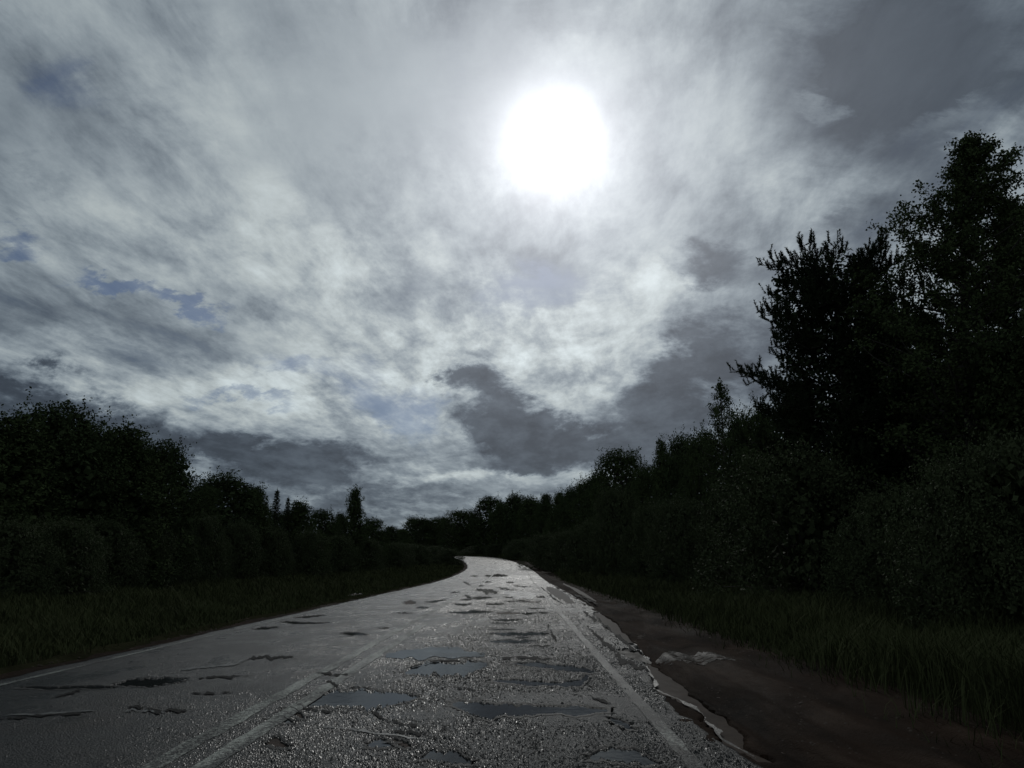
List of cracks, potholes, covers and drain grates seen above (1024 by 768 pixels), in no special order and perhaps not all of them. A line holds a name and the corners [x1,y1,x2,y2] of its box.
pothole [486,673,596,689]
pothole [444,699,618,722]
pothole [411,745,482,767]
crack [129,655,293,714]
pothole [297,686,423,714]
pothole [580,744,668,768]
pothole [111,676,189,688]
crack [372,711,437,740]
pothole [507,660,599,674]
pothole [401,658,493,680]
